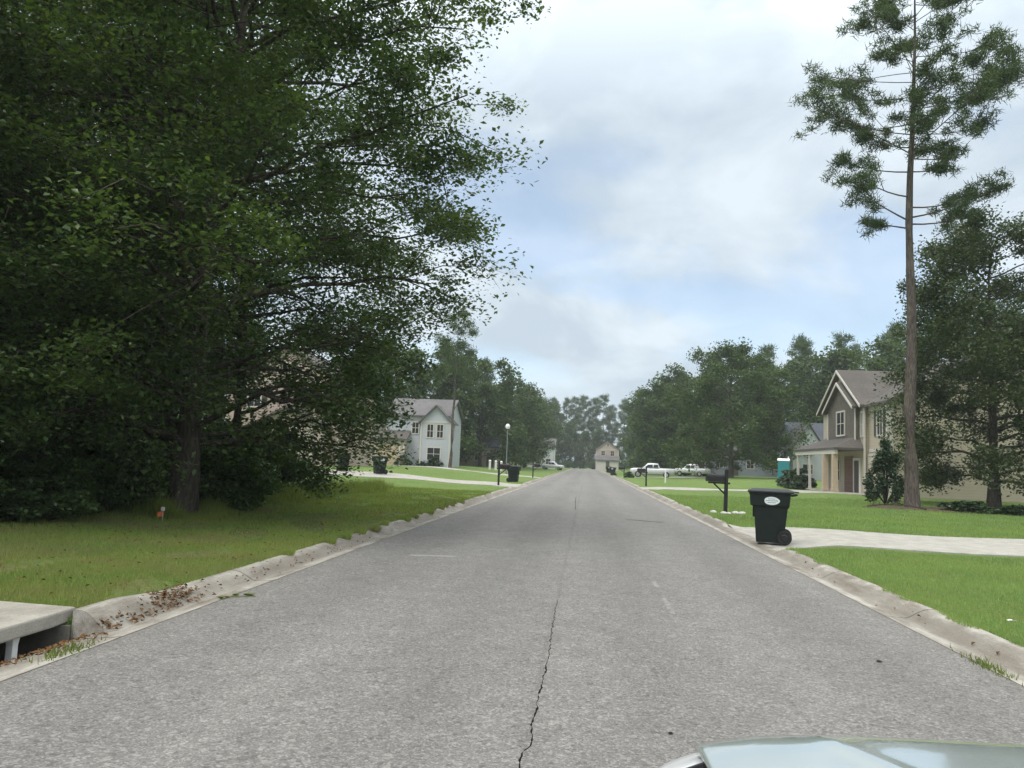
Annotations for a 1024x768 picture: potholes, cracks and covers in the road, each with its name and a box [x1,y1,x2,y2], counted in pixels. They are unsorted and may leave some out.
drain grate [0,601,75,662]
crack [518,601,558,768]
